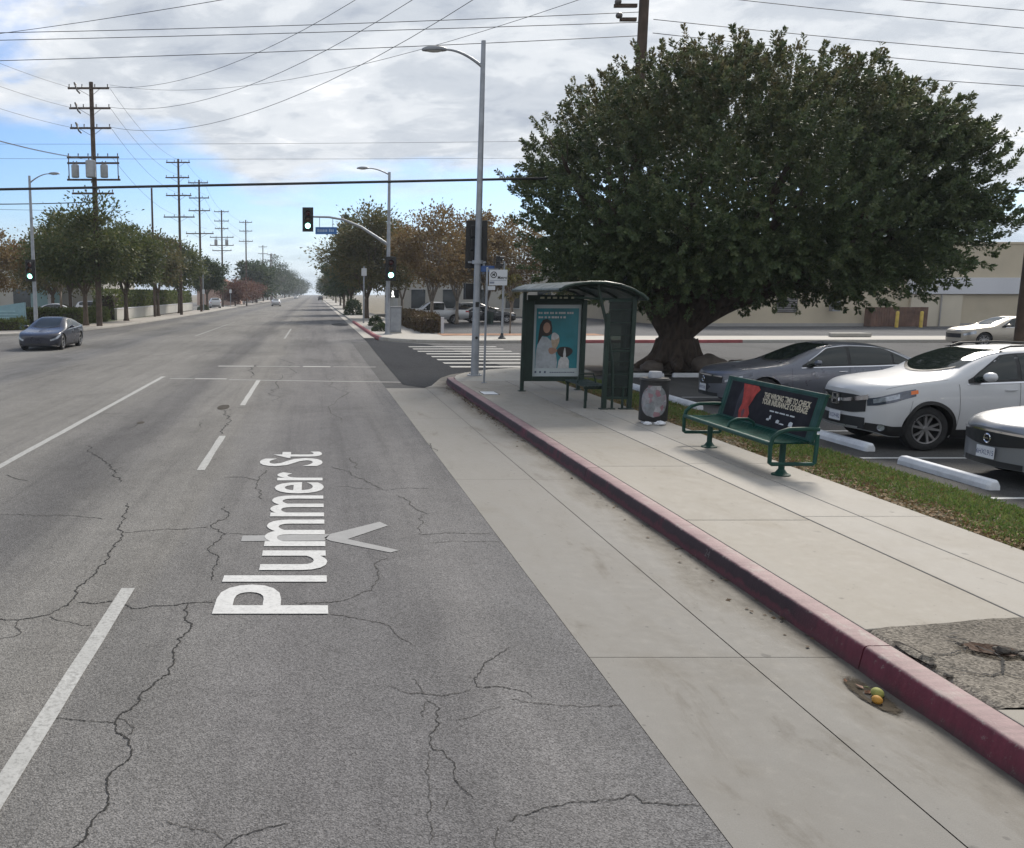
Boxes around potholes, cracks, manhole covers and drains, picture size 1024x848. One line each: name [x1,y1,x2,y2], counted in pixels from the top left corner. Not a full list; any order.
crack [300,558,412,644]
crack [393,647,620,843]
crack [337,457,498,543]
crack [0,503,262,848]
crack [493,794,699,848]
crack [167,821,285,847]
